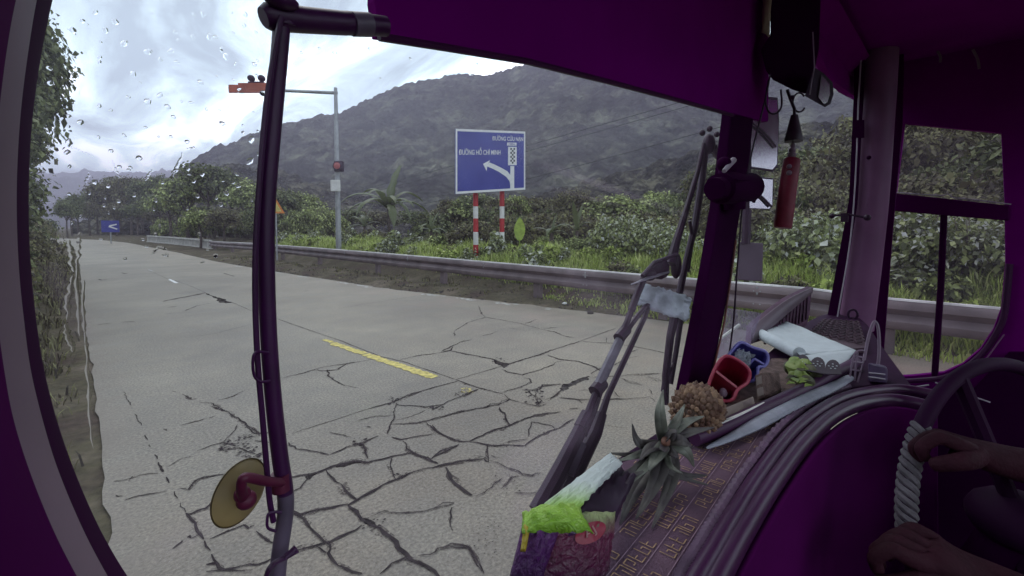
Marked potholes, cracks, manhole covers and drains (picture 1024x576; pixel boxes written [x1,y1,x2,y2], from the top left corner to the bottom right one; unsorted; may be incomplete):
crack [115,391,268,500]
crack [288,307,682,576]
crack [173,524,273,572]
